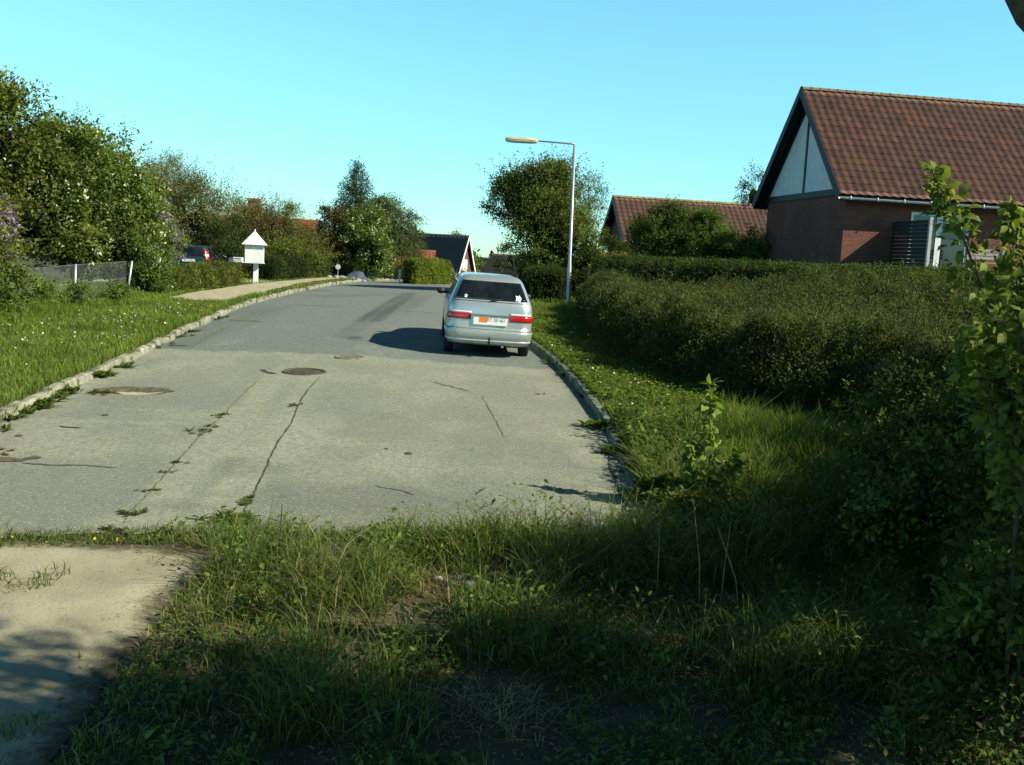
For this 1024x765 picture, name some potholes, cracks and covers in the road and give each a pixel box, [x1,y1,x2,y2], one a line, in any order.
crack [122,369,320,526]
